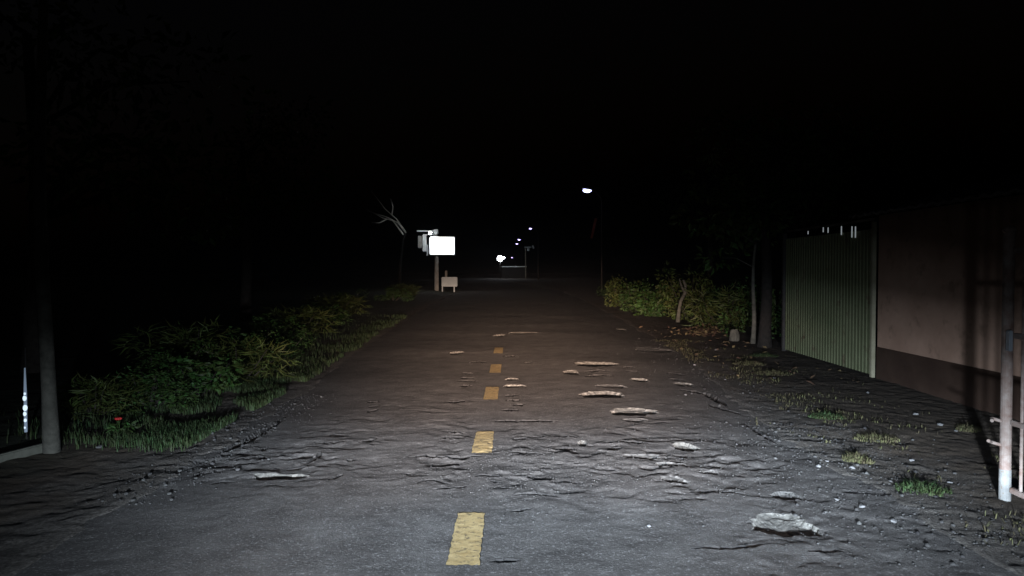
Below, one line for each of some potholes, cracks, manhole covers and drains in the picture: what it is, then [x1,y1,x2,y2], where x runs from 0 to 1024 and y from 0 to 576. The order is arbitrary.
crack [596,440,649,451]
pothole [252,473,309,481]
crack [192,417,376,485]
crack [400,394,578,563]
crack [667,372,779,445]
crack [685,490,761,498]
